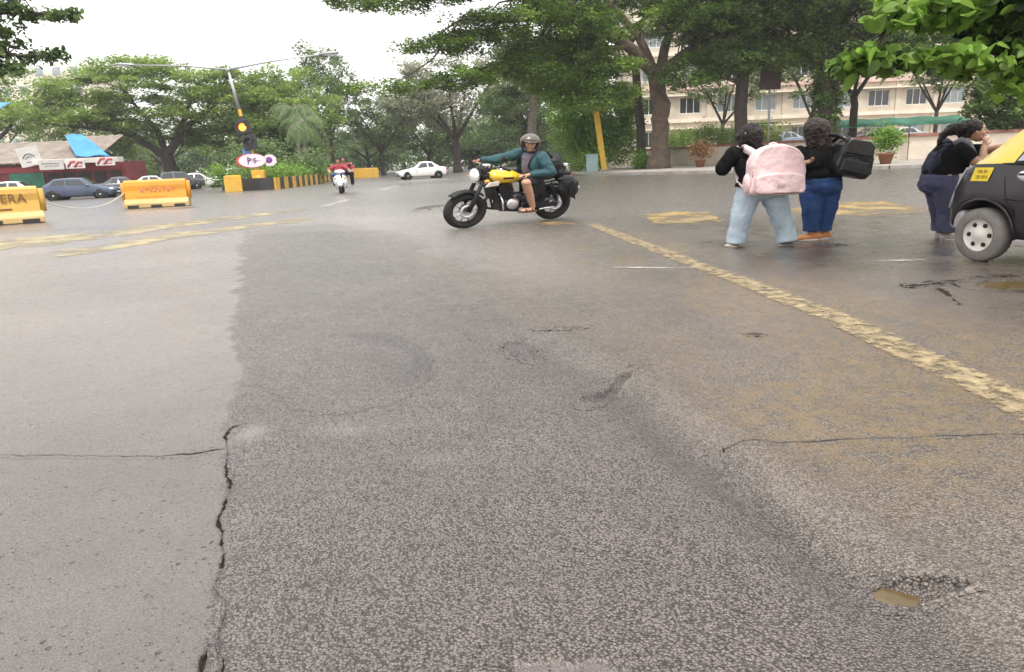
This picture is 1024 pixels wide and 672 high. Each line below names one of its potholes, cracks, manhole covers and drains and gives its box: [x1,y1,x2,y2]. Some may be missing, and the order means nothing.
crack [0,423,247,672]
pothole [496,335,545,365]
pothole [571,352,660,414]
pothole [848,567,1004,618]
crack [721,432,1024,452]
crack [899,274,1022,304]
